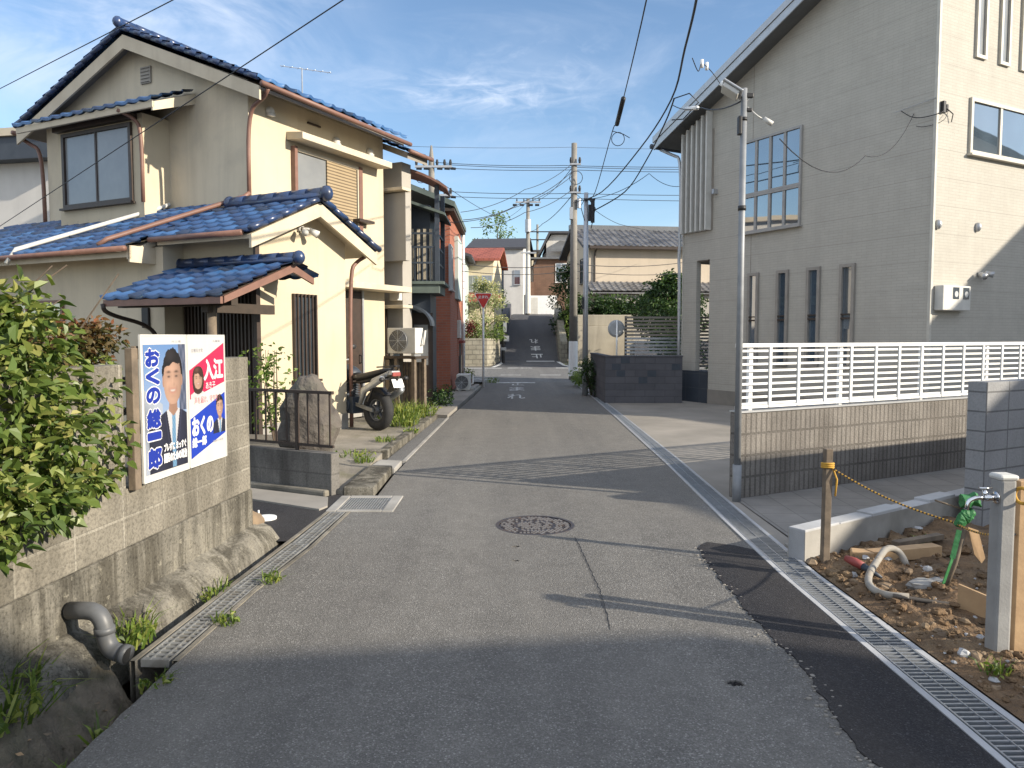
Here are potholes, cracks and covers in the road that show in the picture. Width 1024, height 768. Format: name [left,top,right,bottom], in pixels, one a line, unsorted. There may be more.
drain grate [875,647,1024,767]
manhole cover [496,515,575,535]
drain grate [326,496,403,513]
drain grate [141,589,252,668]
drain grate [714,507,769,537]
drain grate [672,467,708,485]
crack [574,537,610,630]
drain grate [230,543,309,590]
drain grate [746,537,821,581]
drain grate [658,454,688,468]
drain grate [691,485,734,507]
drain grate [635,434,656,443]
